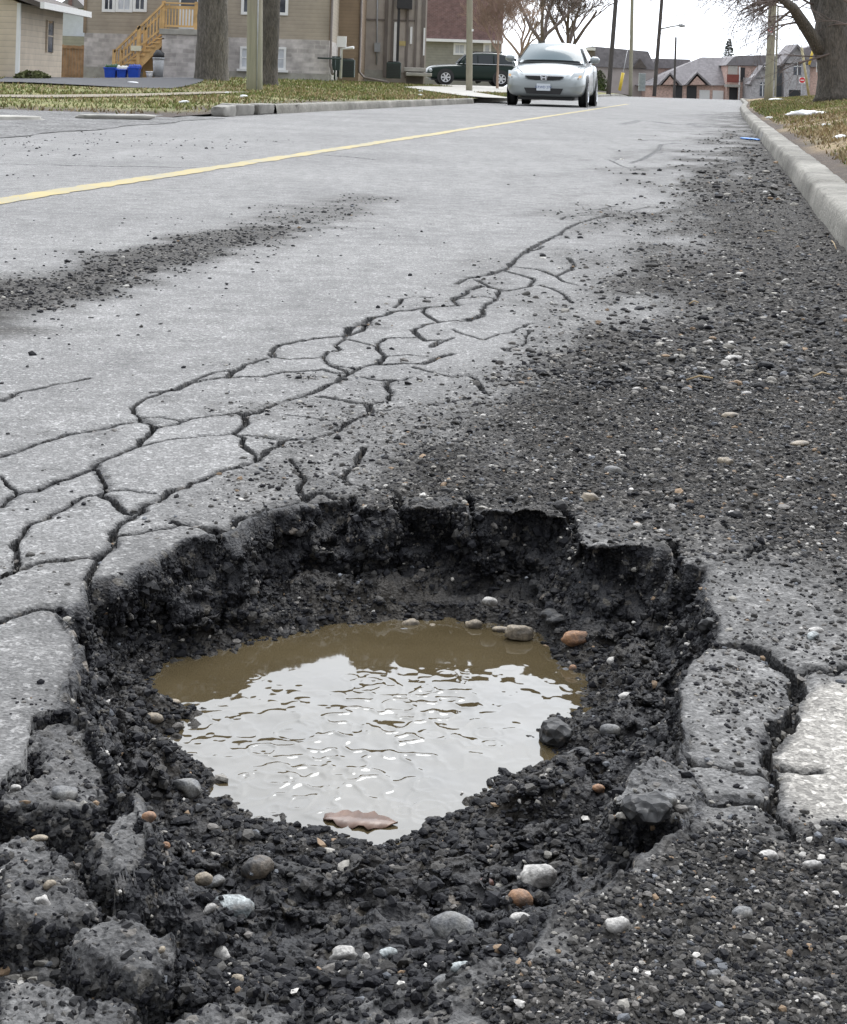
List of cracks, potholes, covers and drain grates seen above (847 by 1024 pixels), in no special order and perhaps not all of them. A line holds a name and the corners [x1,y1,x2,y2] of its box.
crack [689,641,847,843]
pothole [52,495,727,1024]
crack [609,114,729,168]
crack [0,210,628,625]
